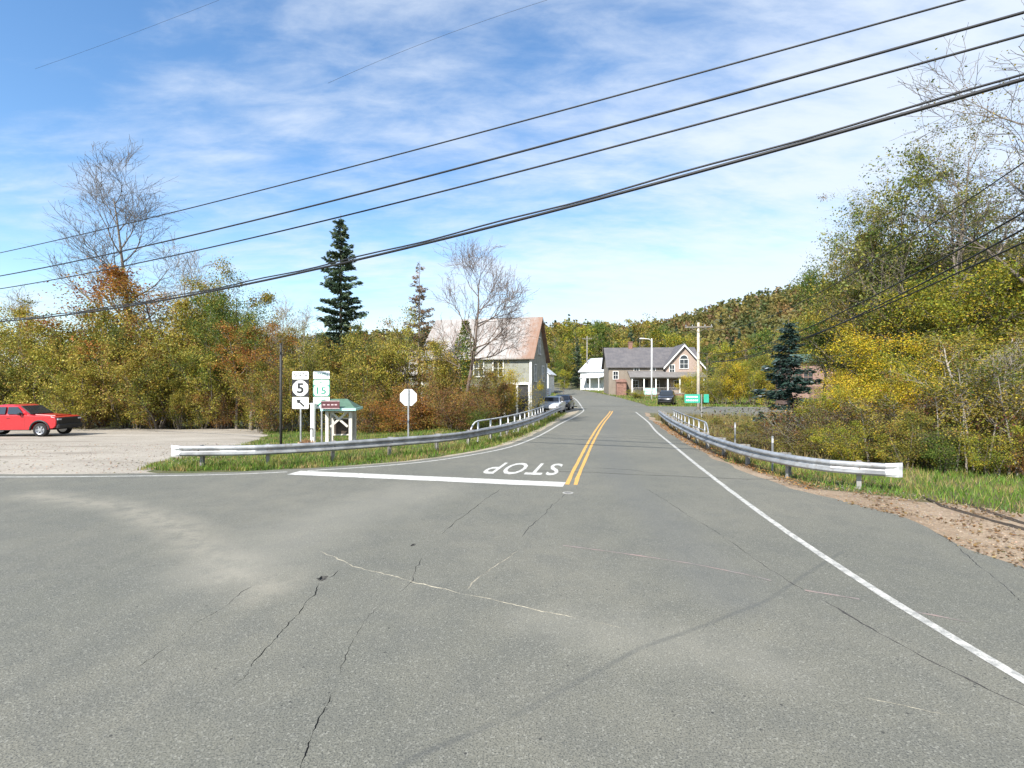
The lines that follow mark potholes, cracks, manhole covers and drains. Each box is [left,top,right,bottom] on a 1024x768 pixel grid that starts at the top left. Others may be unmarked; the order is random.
crack [192,490,616,768]
